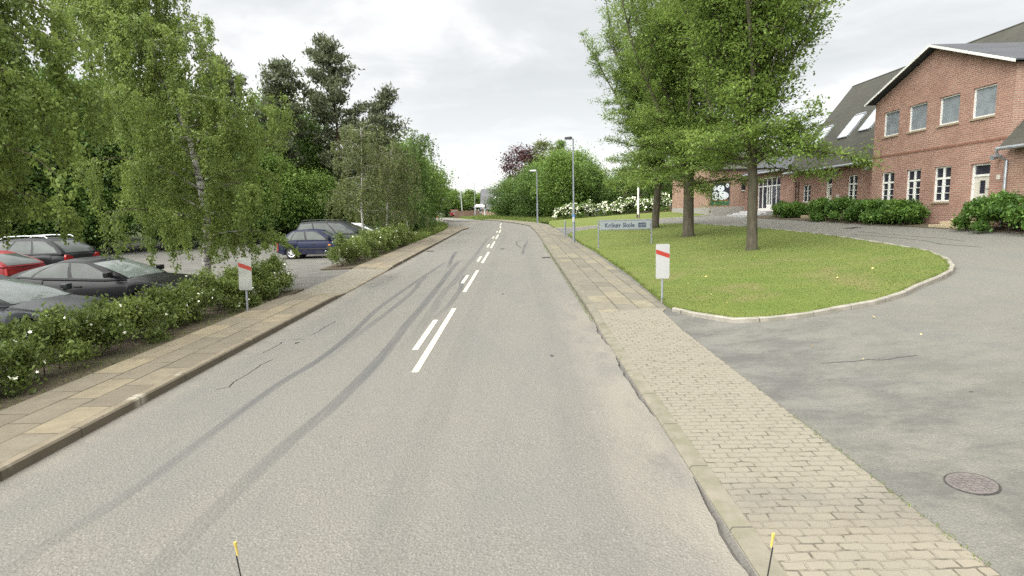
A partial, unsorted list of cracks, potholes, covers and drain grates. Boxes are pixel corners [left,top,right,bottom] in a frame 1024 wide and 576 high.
crack [214,342,282,391]
manhole cover [943,472,1001,496]
